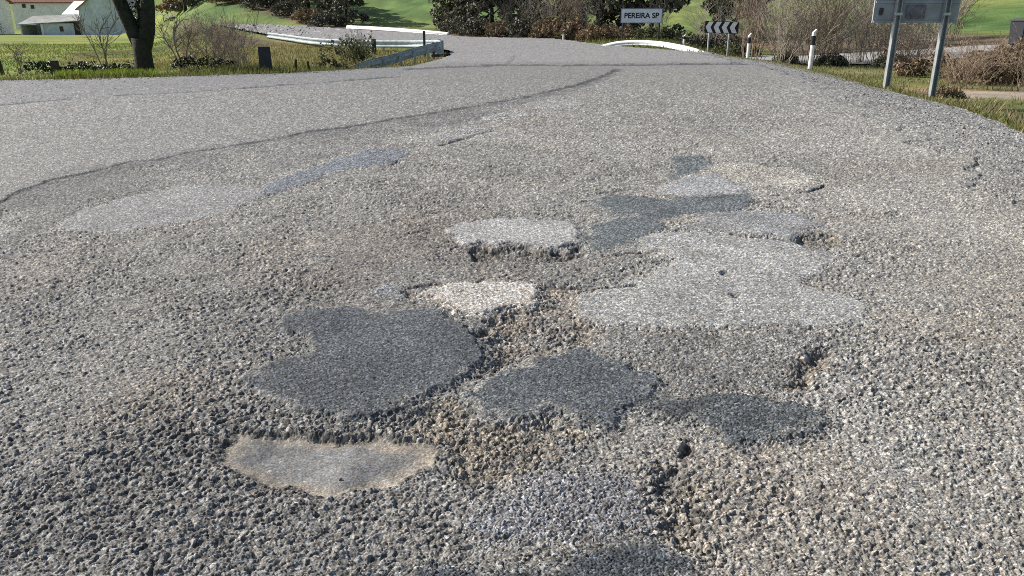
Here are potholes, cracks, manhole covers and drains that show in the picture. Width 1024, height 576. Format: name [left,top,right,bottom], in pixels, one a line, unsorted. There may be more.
pothole [466,283,603,381]
pothole [774,344,844,392]
pothole [469,244,587,264]
pothole [795,232,845,252]
pothole [666,437,702,460]
pothole [371,396,619,494]
pothole [641,462,728,568]
